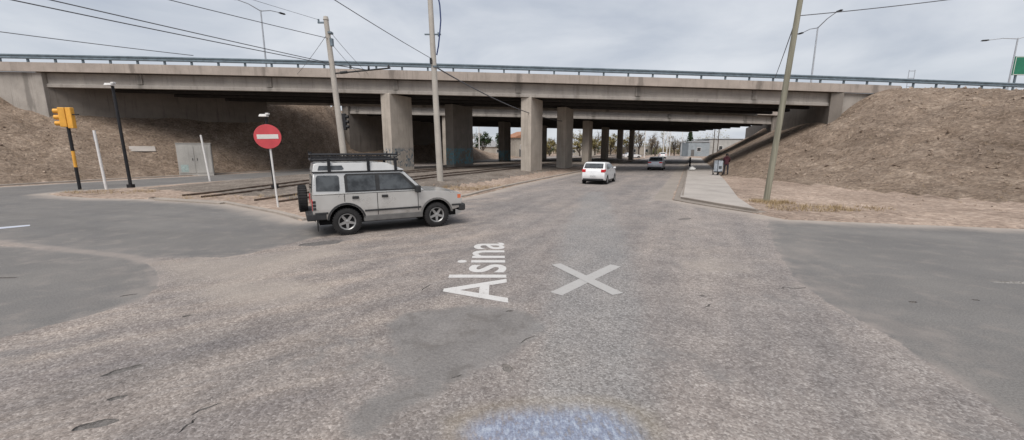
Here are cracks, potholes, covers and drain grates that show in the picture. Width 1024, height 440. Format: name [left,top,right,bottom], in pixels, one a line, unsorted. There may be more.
crack [176,402,223,435]
